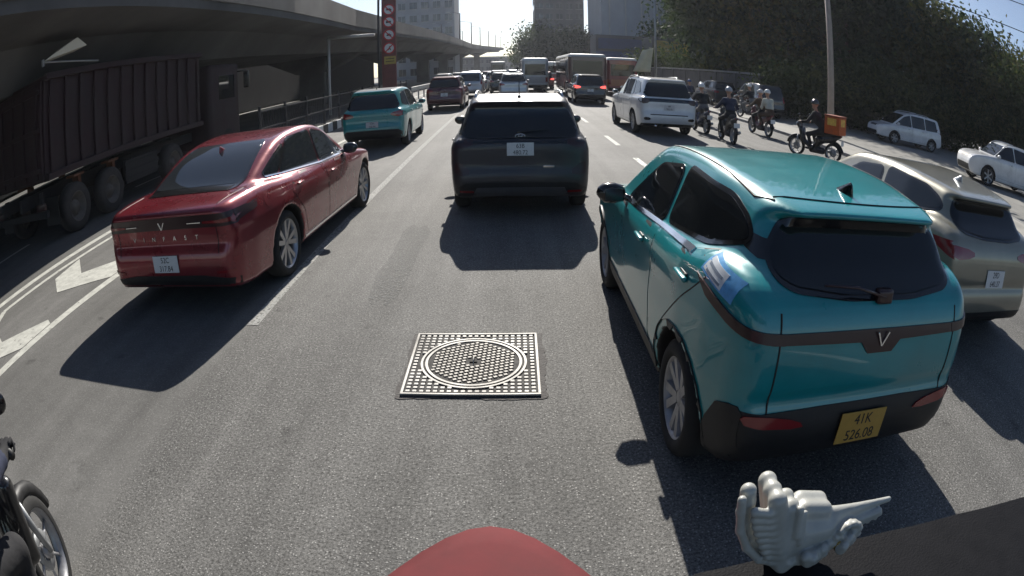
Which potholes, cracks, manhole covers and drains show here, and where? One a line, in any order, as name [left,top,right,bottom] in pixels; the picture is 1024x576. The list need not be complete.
manhole cover [395,333,549,400]
